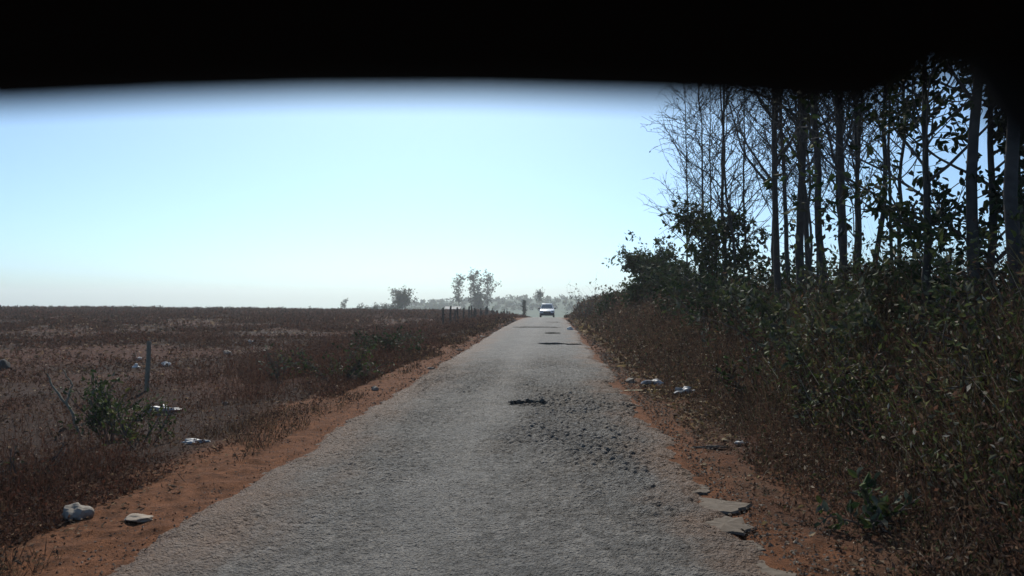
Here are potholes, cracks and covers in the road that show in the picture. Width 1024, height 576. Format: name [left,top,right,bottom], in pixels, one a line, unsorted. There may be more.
pothole [508,398,548,407]
